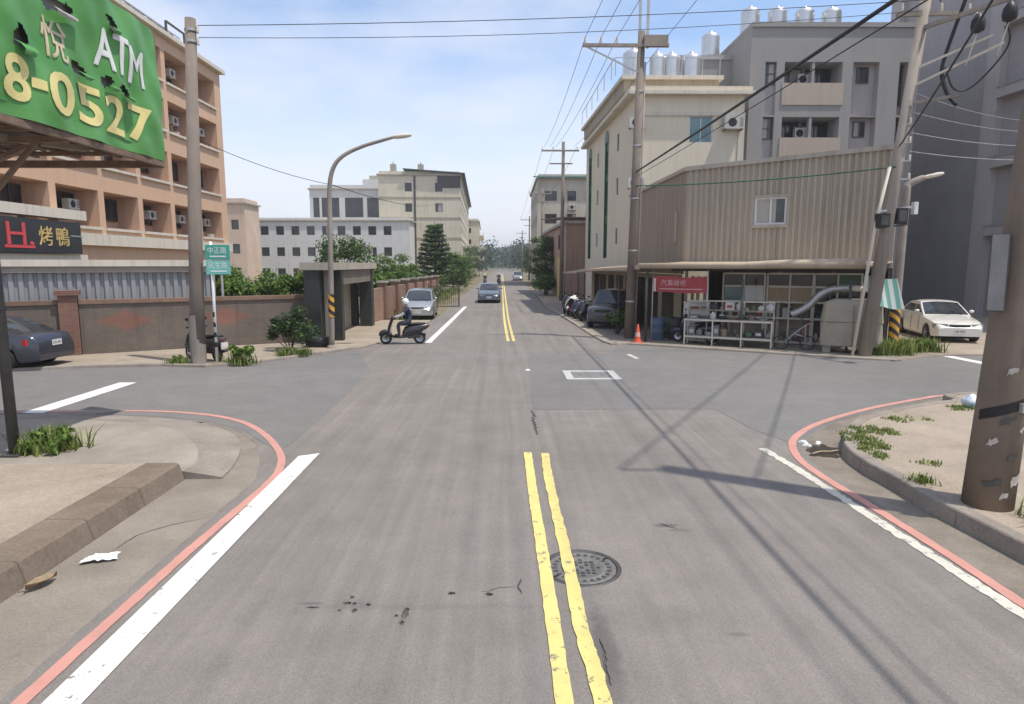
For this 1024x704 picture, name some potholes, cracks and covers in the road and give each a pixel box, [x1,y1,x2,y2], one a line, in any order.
crack [116,517,206,549]
manhole cover [549,550,622,587]
crack [480,579,522,594]
crack [599,639,612,686]
